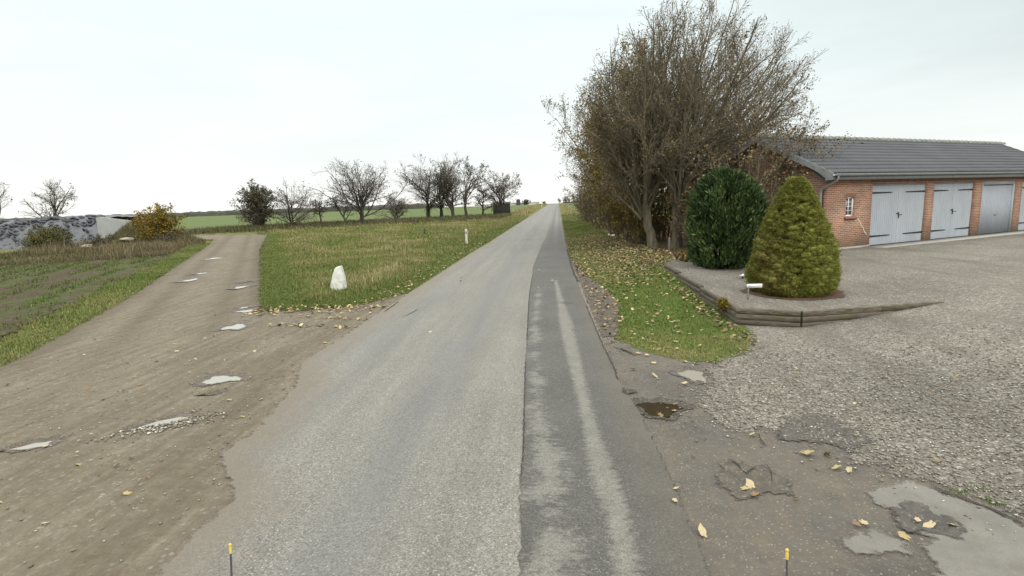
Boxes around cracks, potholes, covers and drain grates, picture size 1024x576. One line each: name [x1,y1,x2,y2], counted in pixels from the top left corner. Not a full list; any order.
pothole [206,320,255,332]
pothole [185,371,258,388]
pothole [108,408,208,434]
pothole [889,500,968,540]
pothole [0,432,78,453]
pothole [715,459,794,500]
pothole [632,397,695,421]
